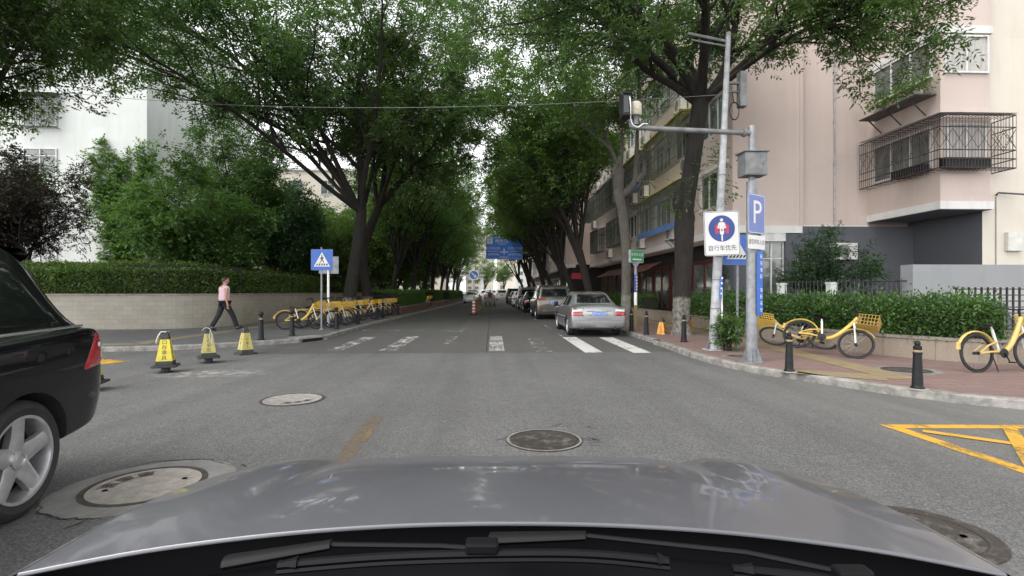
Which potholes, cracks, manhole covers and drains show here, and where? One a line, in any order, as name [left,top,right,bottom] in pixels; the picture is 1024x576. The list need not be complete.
manhole cover [873,366,944,375]
manhole cover [259,393,325,406]
manhole cover [887,506,1012,565]
manhole cover [506,429,583,452]
manhole cover [36,460,236,520]
